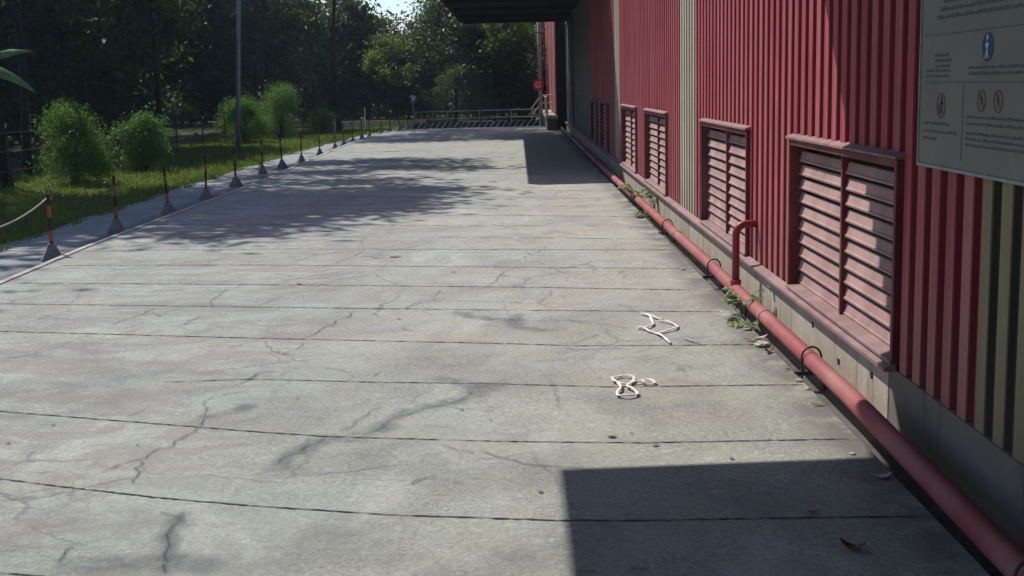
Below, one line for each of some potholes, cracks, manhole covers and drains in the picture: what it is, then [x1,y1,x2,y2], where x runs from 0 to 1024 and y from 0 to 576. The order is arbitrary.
crack [111,518,212,570]
crack [109,419,204,481]
